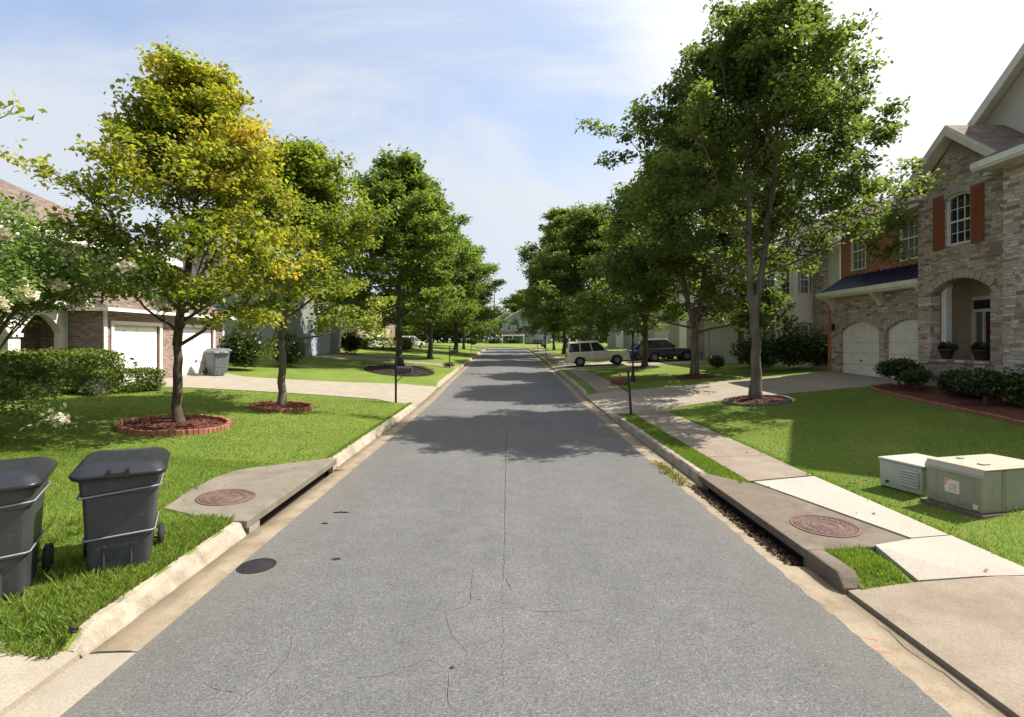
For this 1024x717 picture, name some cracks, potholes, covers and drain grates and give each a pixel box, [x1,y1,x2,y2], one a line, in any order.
crack [878,624,987,707]
drain grate [164,458,337,534]
manhole cover [195,489,256,506]
crack [345,567,481,709]
manhole cover [790,514,863,538]
drain grate [698,474,907,567]
